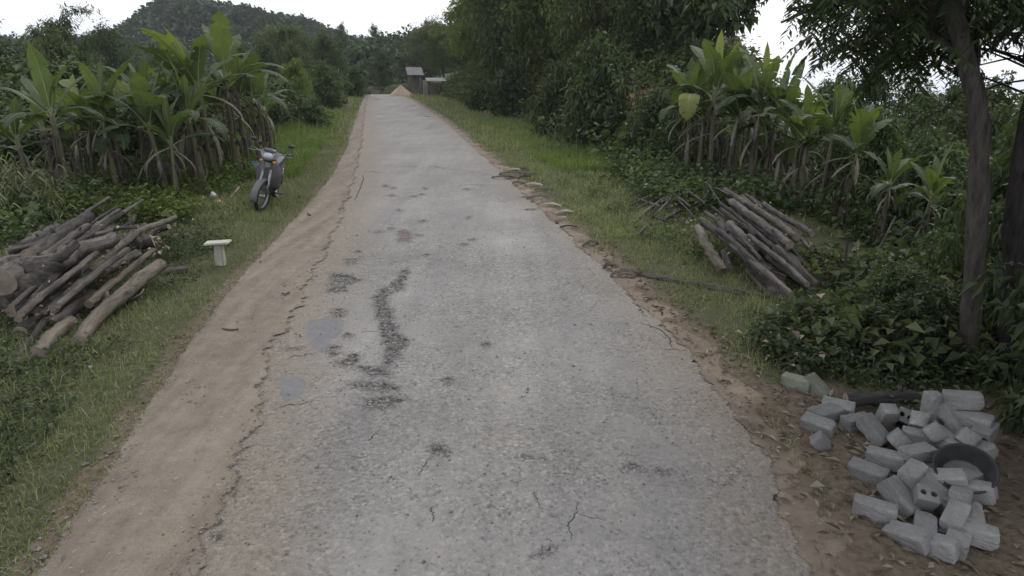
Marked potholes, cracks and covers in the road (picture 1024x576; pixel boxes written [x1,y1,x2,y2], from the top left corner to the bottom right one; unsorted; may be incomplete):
crack [625,293,688,351]
crack [567,502,604,541]
pothole [329,273,361,293]
